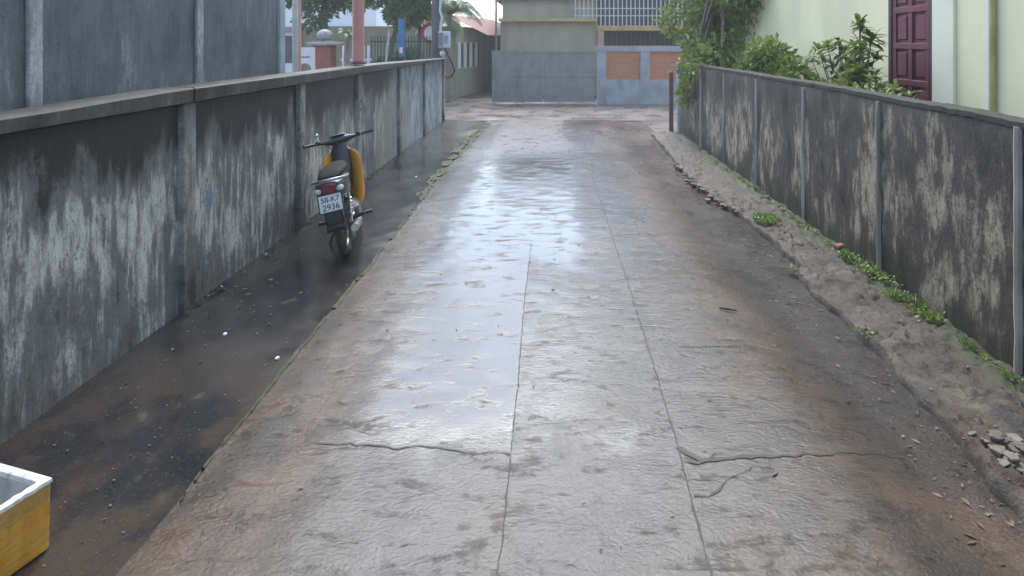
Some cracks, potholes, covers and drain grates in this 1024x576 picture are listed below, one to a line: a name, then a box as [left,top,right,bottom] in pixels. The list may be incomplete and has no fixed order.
crack [306,442,510,455]
crack [676,446,905,497]
